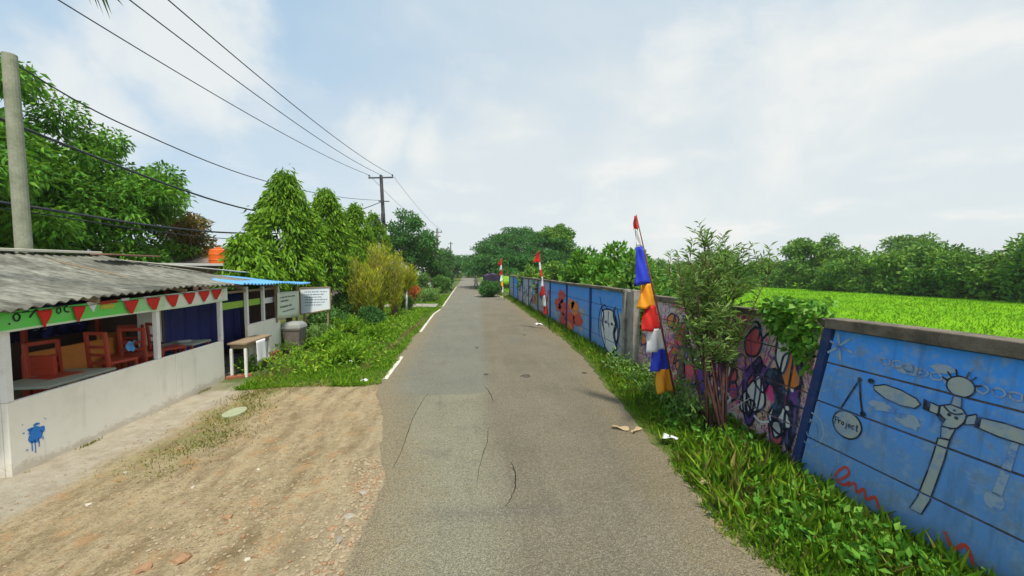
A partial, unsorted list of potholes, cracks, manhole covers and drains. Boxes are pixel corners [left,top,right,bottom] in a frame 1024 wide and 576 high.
crack [505,463,516,506]
